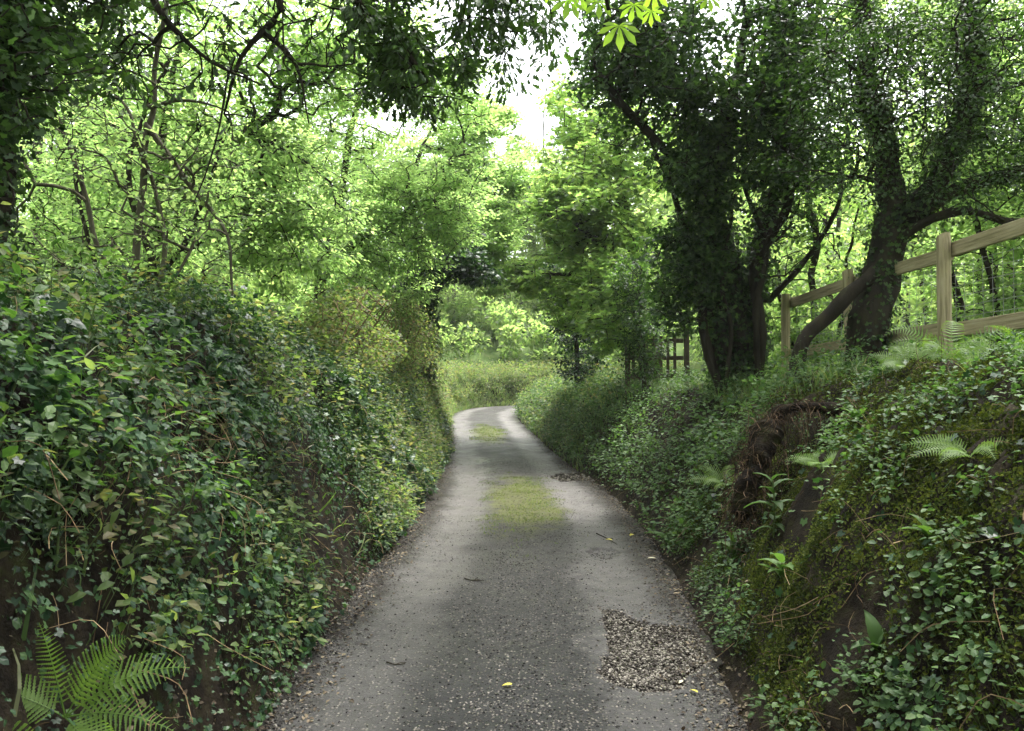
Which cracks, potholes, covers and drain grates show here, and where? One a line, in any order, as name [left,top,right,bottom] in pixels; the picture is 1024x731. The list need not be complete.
pothole [547,472,595,482]
